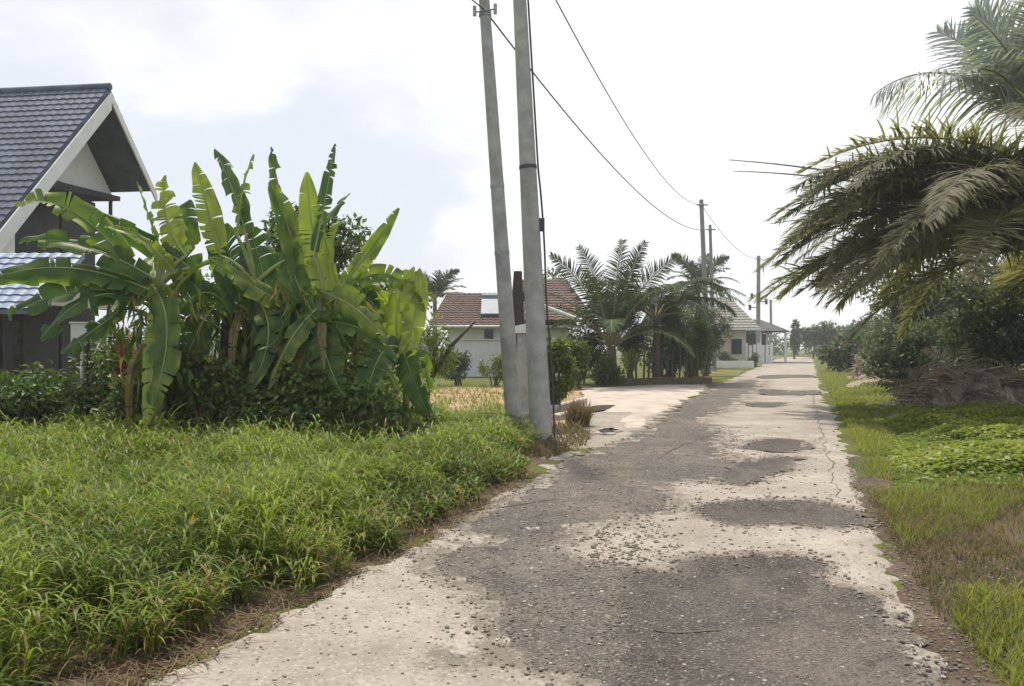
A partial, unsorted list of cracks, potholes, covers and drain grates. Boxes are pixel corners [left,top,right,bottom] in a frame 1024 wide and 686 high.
crack [811,395,842,499]
